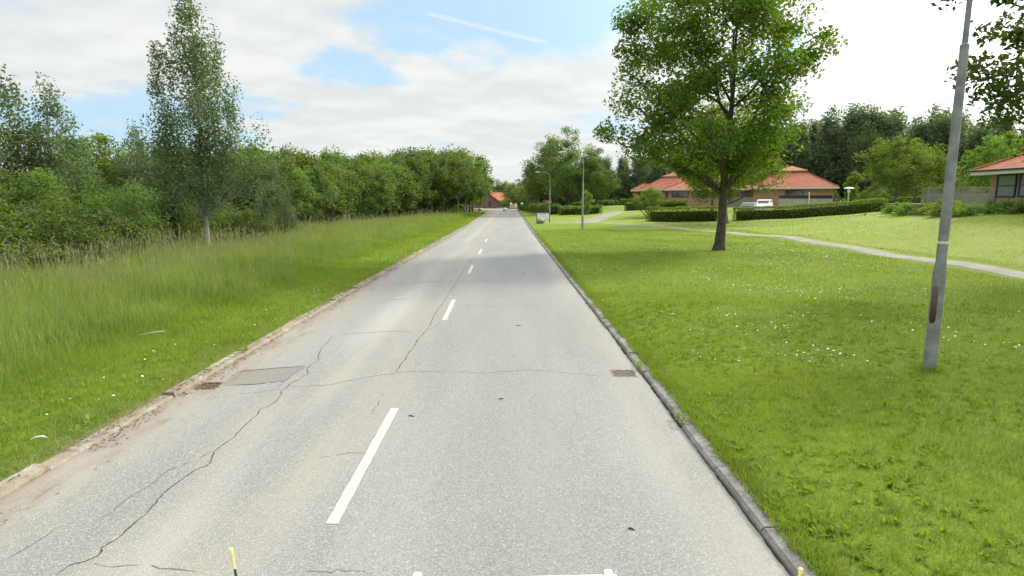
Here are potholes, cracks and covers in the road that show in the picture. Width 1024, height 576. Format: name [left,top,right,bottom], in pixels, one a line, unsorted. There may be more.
drain grate [191,382,225,390]
crack [55,335,595,576]
